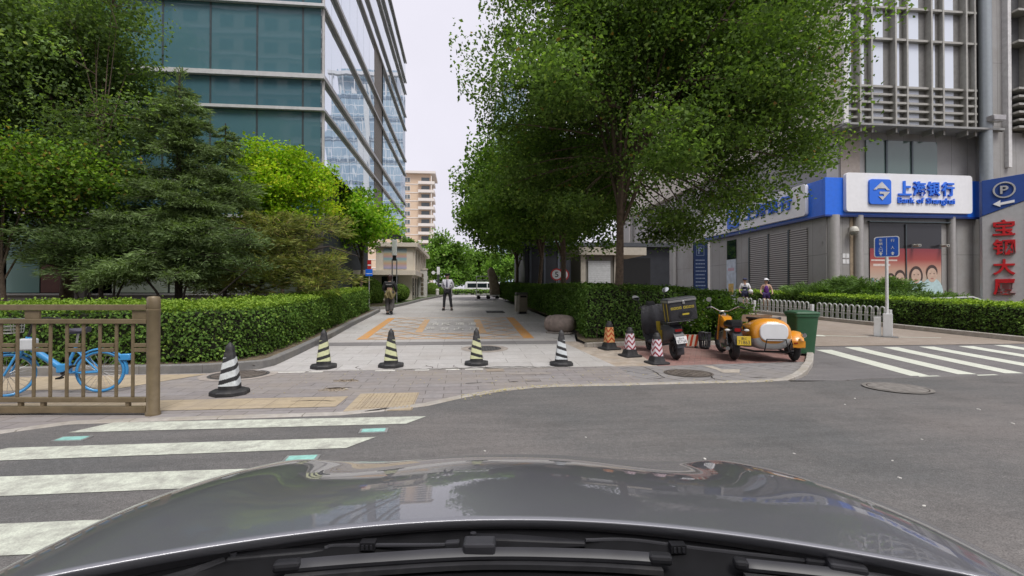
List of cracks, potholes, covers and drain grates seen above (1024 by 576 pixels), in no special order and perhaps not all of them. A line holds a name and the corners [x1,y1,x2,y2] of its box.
manhole cover [664,369,714,377]
manhole cover [197,369,278,381]
manhole cover [861,382,936,394]
